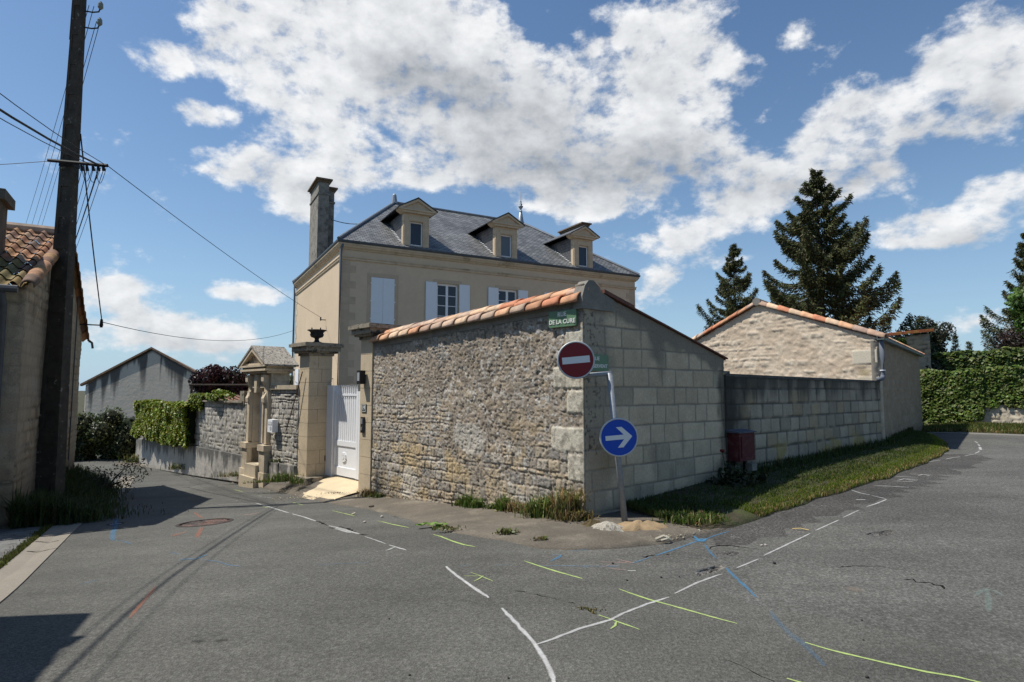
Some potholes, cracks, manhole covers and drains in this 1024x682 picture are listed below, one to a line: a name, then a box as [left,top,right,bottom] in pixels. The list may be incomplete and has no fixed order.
pothole [695,565,726,576]
crack [830,566,945,589]
manhole cover [175,518,234,527]
